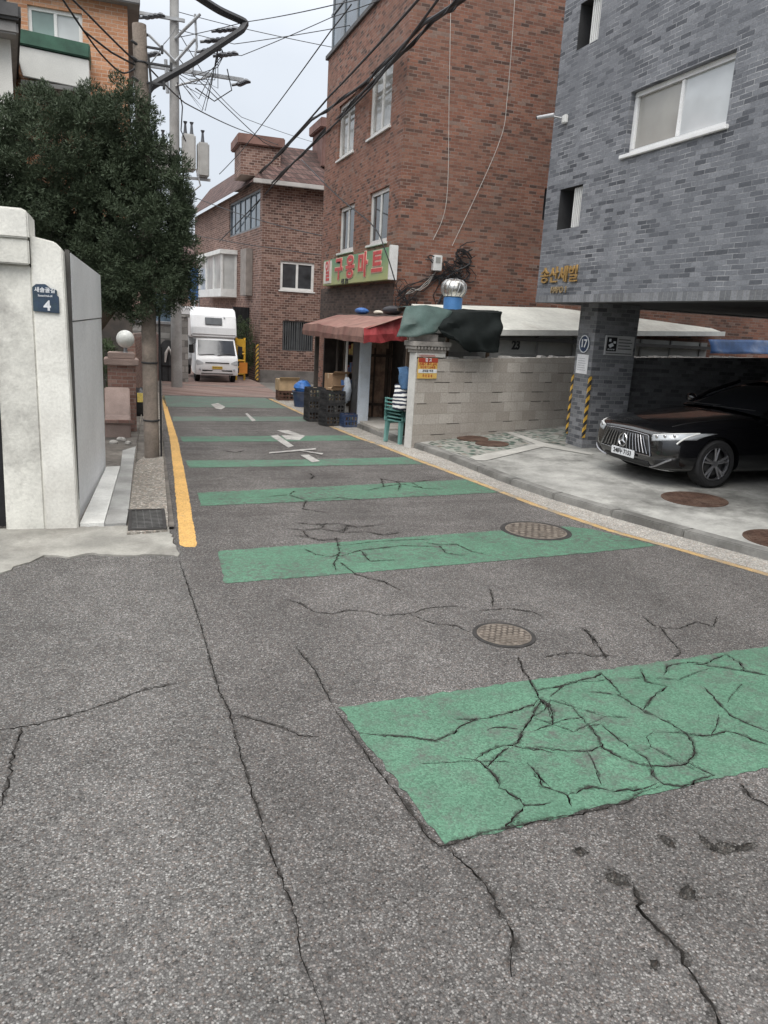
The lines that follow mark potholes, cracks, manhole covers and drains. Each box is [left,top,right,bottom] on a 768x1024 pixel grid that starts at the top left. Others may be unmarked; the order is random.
manhole cover [500,521,572,541]
crack [233,714,314,737]
crack [632,882,724,1024]
manhole cover [661,491,729,507]
manhole cover [742,529,768,547]
pothole [678,884,696,900]
crack [282,590,543,633]
crack [643,616,717,658]
crack [287,479,474,590]
pothole [657,835,676,848]
